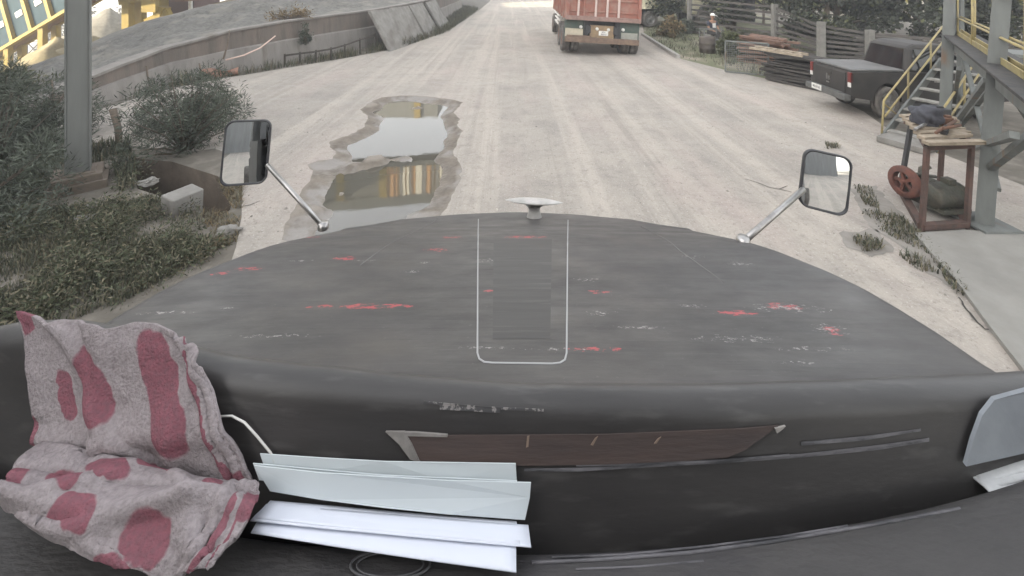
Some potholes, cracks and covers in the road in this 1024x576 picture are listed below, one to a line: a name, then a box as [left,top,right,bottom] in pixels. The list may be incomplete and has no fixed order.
pothole [282,96,463,241]
crack [958,297,989,330]
